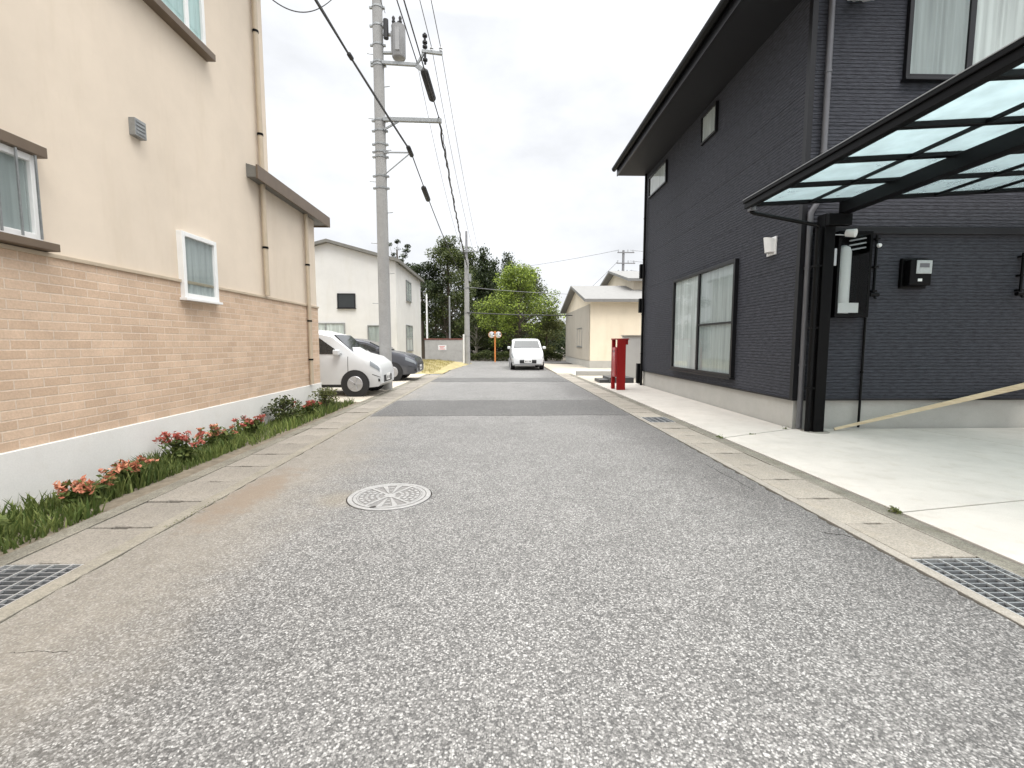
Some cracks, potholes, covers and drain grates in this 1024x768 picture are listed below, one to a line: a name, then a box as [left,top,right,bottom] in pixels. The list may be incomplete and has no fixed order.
drain grate [913,558,1024,617]
manhole cover [347,483,431,511]
drain grate [0,564,83,609]
